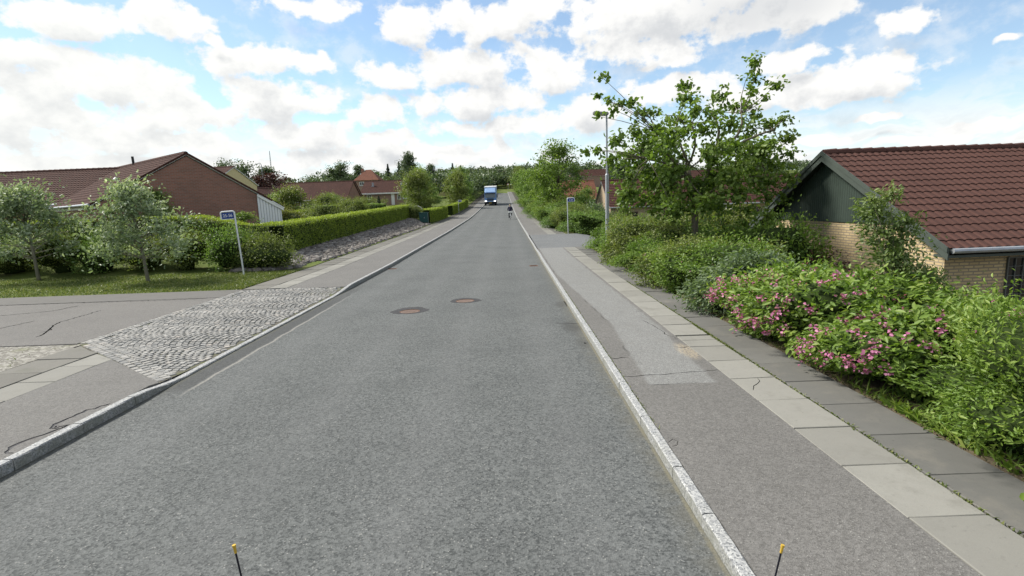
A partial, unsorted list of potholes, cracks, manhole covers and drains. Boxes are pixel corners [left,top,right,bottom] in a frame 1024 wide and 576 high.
crack [0,306,101,336]
